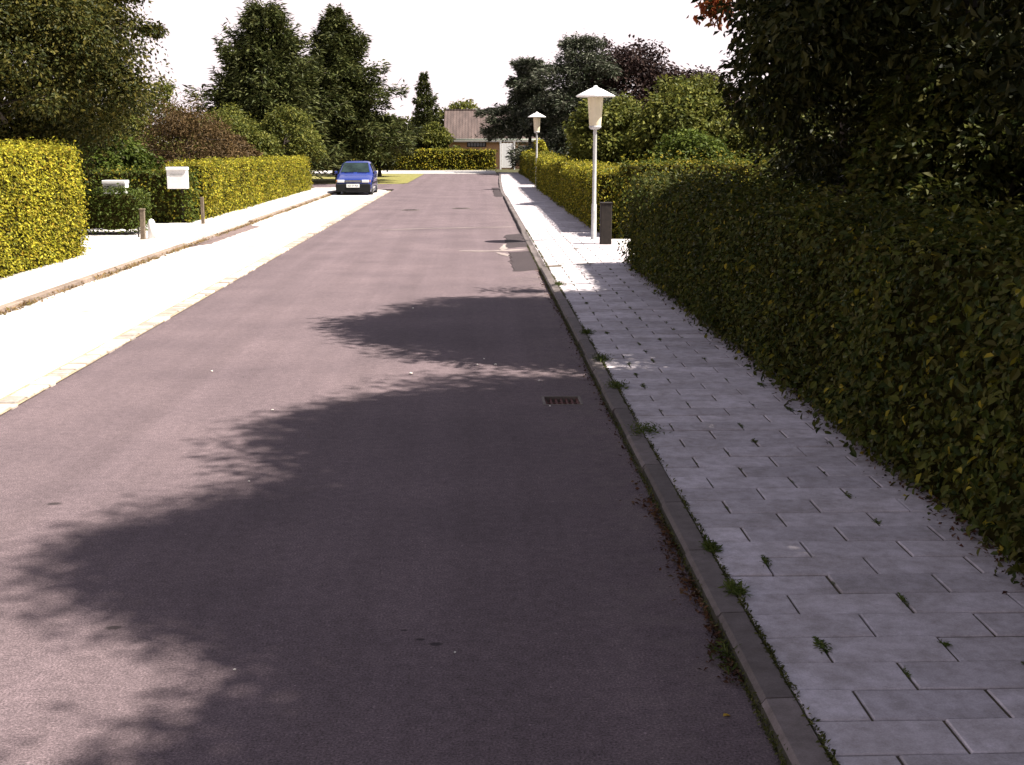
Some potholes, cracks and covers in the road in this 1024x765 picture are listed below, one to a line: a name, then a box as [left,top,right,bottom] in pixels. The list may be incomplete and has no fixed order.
drain grate [541,396,583,405]
